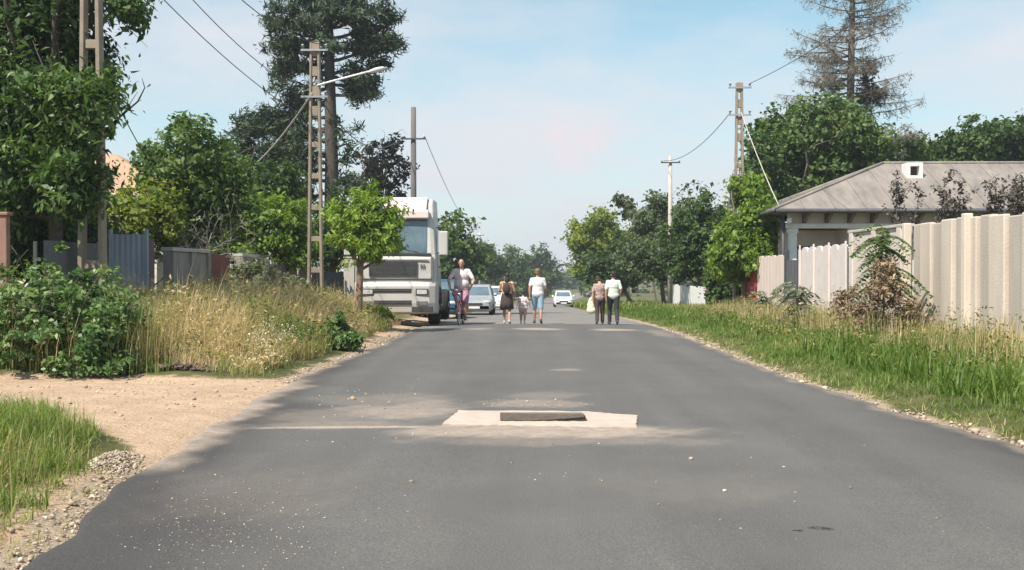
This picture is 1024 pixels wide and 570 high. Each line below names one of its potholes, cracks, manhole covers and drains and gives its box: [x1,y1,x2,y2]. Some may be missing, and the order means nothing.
manhole cover [500,412,586,421]
